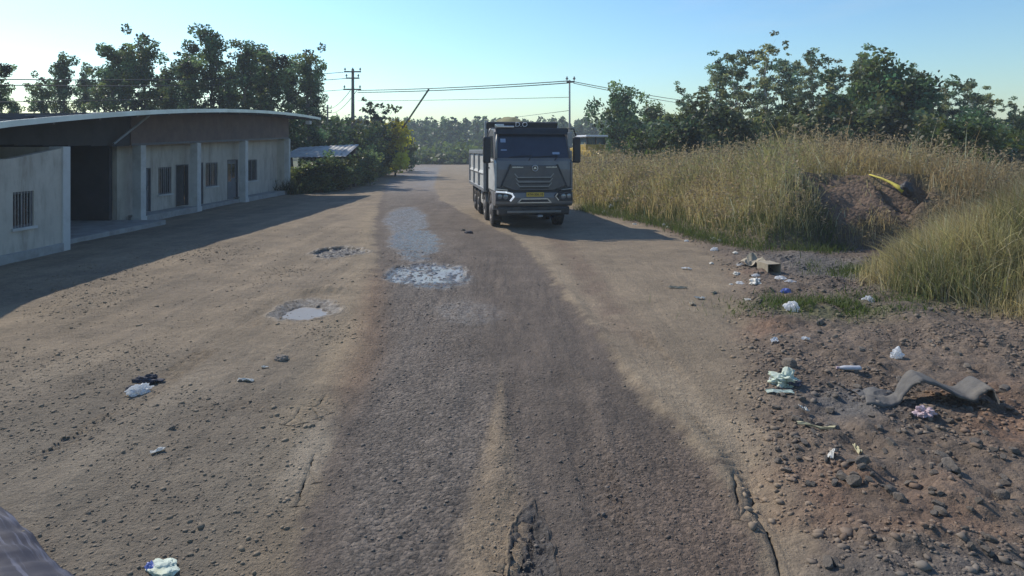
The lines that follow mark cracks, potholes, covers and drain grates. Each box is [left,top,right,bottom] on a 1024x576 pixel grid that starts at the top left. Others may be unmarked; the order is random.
pothole [505,497,561,576]
pothole [375,261,473,287]
pothole [306,245,375,260]
pothole [262,298,347,323]
crack [726,470,791,576]
crack [288,453,323,507]
